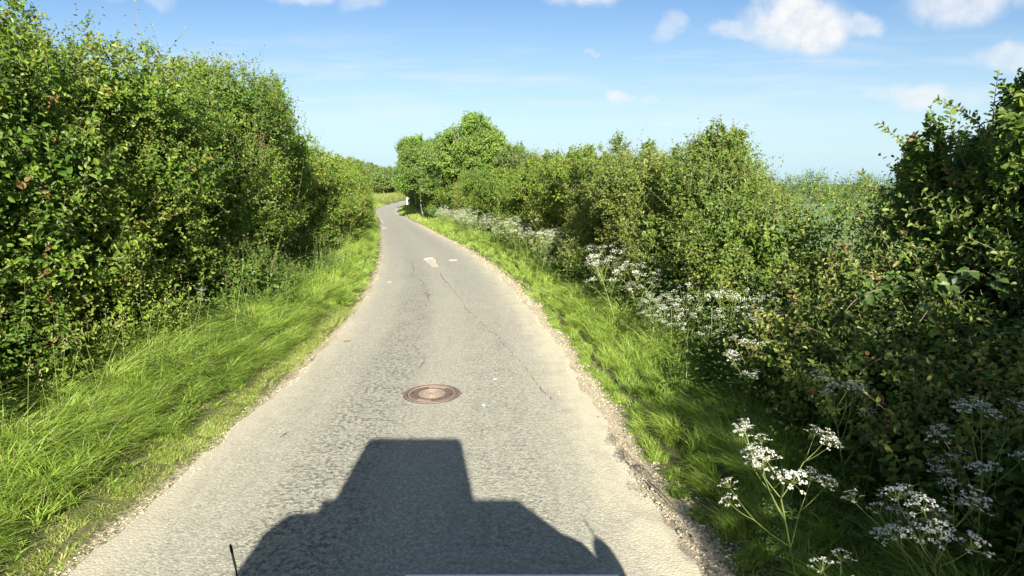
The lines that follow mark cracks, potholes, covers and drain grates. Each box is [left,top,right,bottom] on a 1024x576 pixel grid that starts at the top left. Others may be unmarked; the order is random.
crack [404,262,551,399]
manhole cover [401,384,462,404]
